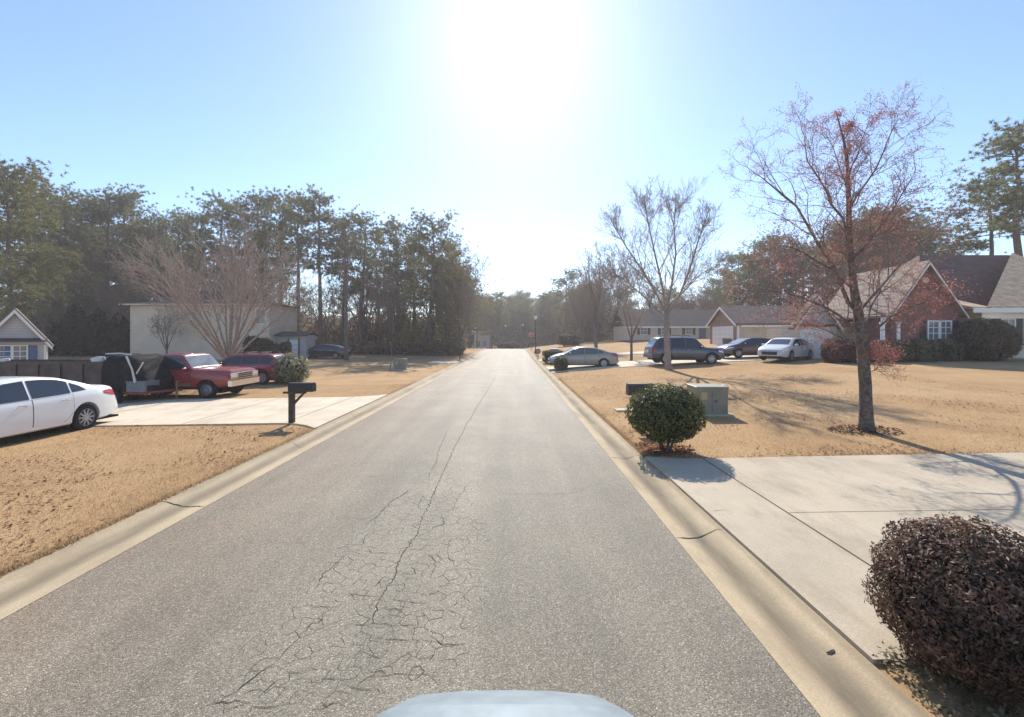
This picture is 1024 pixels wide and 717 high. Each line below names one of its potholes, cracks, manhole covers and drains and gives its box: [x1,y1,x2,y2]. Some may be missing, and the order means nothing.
crack [205,381,493,713]
